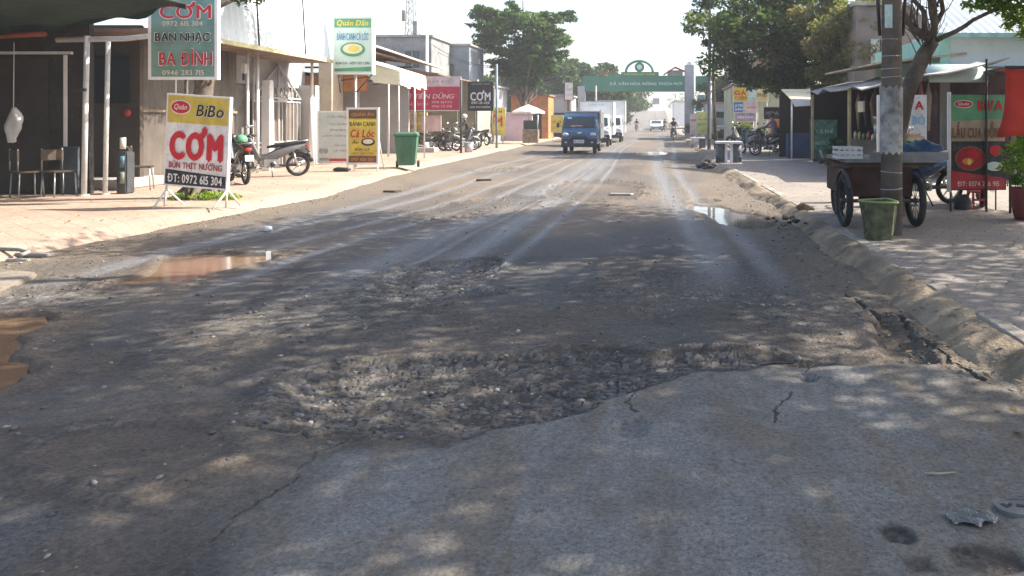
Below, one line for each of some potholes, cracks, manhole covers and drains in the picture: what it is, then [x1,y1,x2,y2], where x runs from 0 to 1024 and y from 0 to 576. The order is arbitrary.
pothole [363,256,505,303]
crack [772,391,793,423]
crack [624,392,639,413]
pothole [870,315,944,364]
manhole cover [995,498,1024,518]
crack [201,420,368,546]
pothole [798,373,822,383]
pothole [279,345,797,436]
